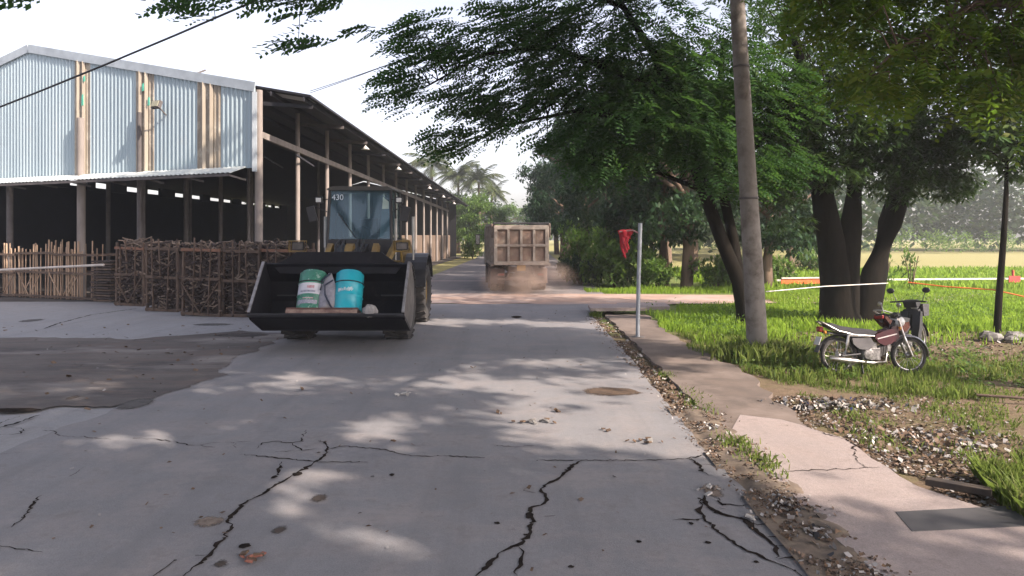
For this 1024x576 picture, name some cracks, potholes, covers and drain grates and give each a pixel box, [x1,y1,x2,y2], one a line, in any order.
crack [675,495,802,576]
crack [12,496,39,526]
crack [691,455,710,475]
crack [784,425,951,494]
crack [153,432,582,576]
